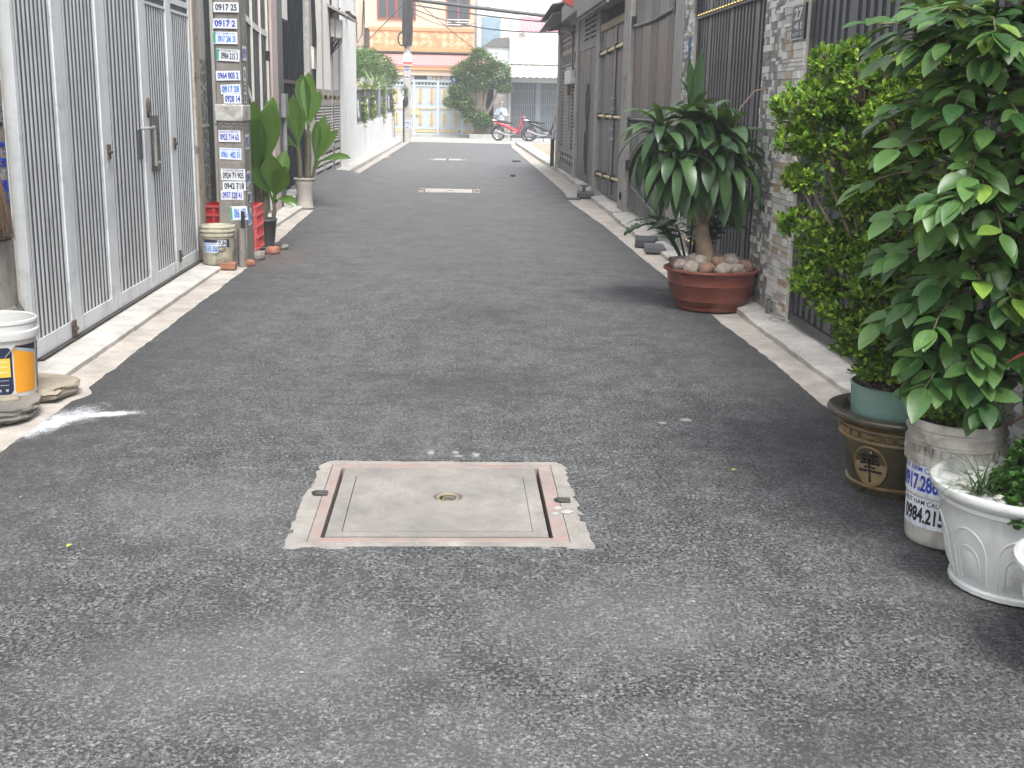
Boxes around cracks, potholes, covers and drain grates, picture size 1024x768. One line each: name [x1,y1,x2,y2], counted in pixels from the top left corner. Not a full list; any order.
manhole cover [282,460,595,549]
